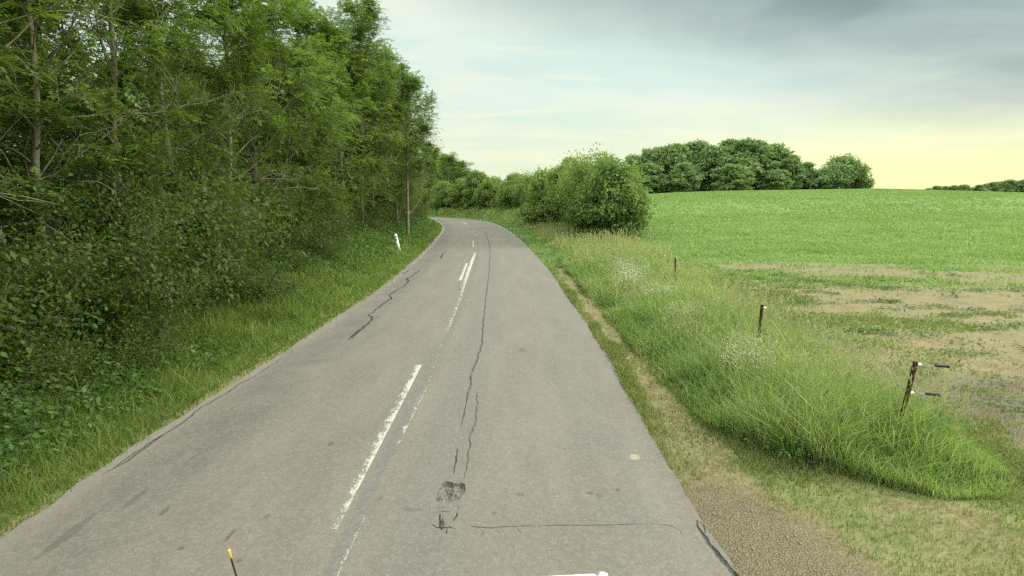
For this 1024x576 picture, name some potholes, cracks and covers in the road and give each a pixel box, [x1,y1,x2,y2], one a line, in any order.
pothole [436,481,465,503]
crack [433,507,738,576]
crack [348,270,420,340]
crack [453,393,479,477]
